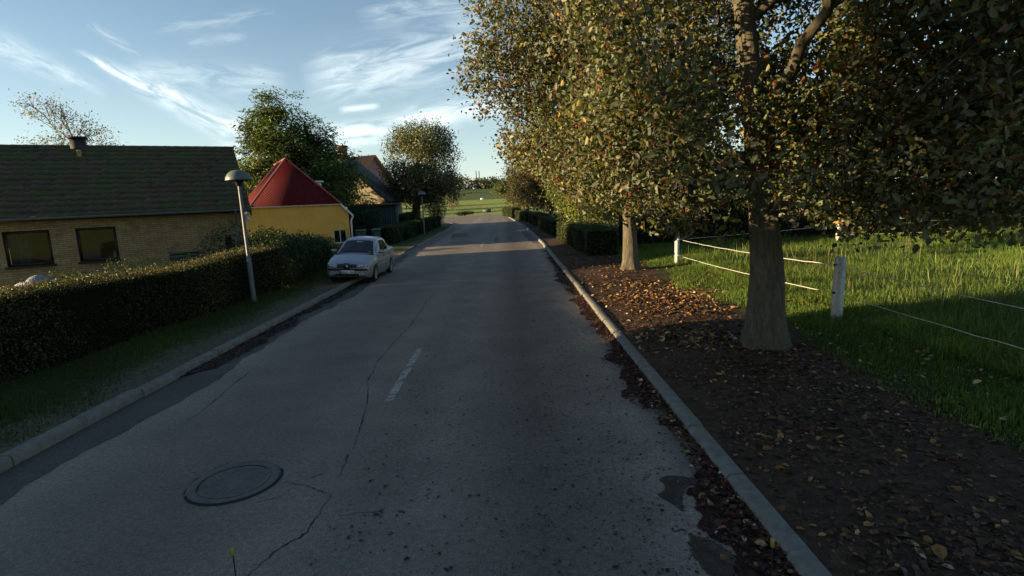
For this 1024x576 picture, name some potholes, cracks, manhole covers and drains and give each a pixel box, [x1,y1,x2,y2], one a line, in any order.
manhole cover [183,461,284,506]
crack [248,299,428,576]
